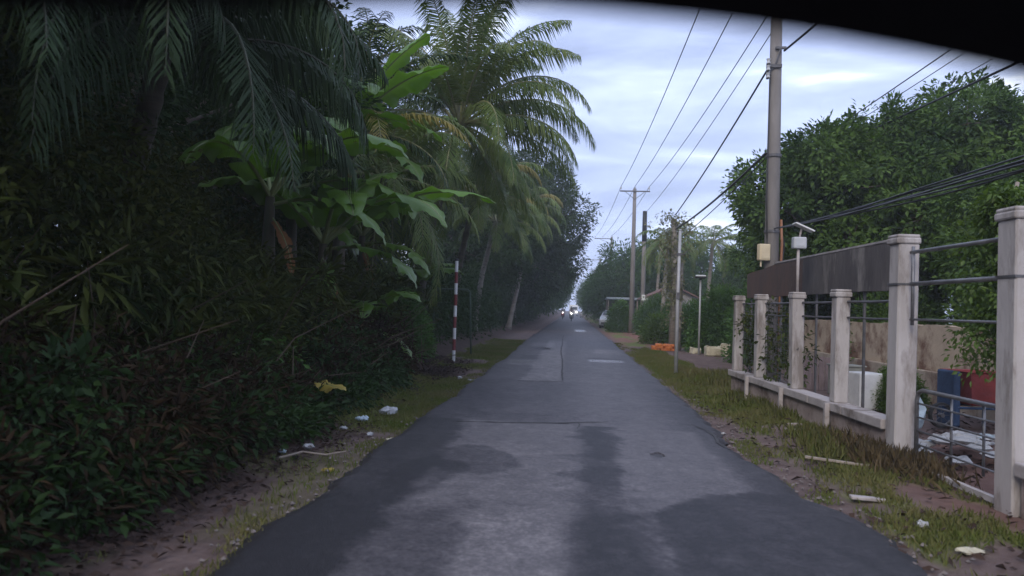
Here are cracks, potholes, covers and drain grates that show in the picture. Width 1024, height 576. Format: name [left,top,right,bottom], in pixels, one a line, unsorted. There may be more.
pothole [642,450,673,460]
